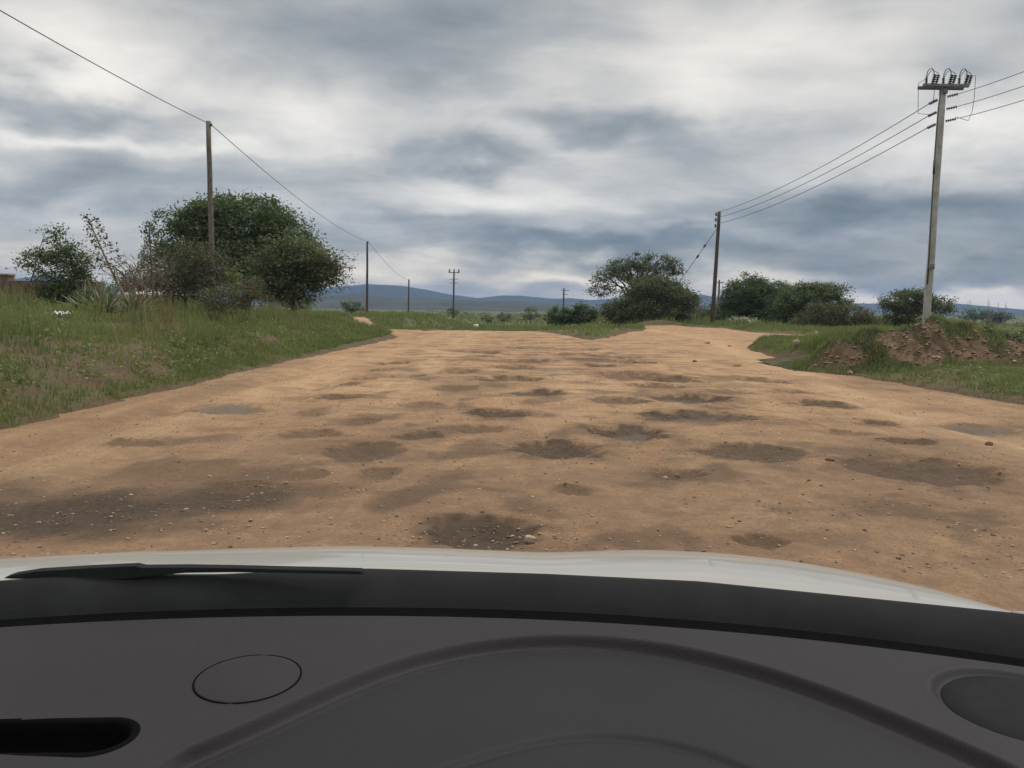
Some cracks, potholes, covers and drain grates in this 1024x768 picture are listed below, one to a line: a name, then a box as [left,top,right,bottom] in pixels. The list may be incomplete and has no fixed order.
pothole [354,467,403,481]
pothole [420,513,544,551]
pothole [509,439,612,461]
pothole [729,534,794,550]
pothole [550,484,594,496]
pothole [927,422,1024,436]
pothole [465,408,535,418]
pothole [103,437,170,447]
pothole [634,409,769,423]
pothole [582,424,671,442]
pothole [686,441,819,463]
pothole [317,441,409,462]
